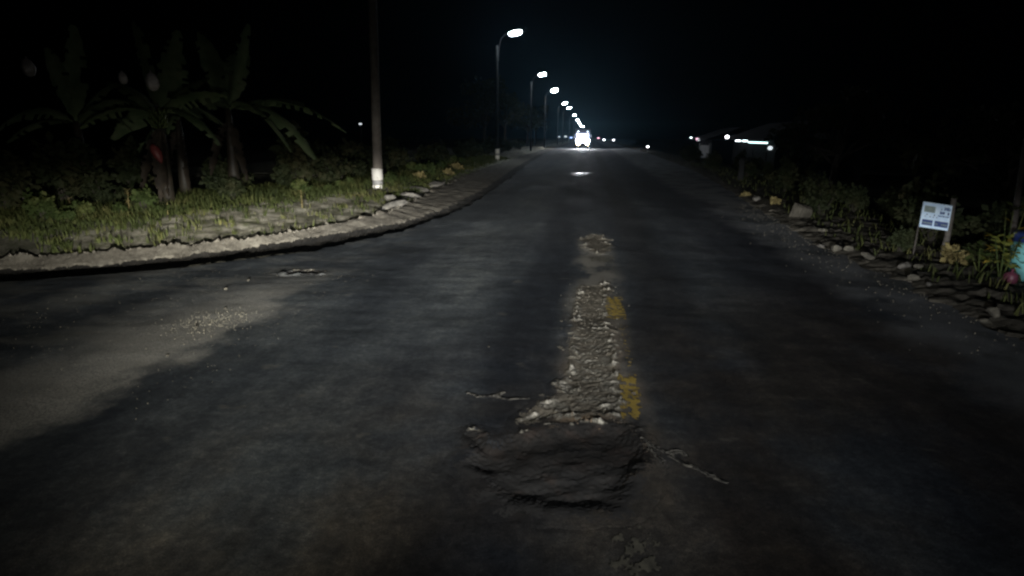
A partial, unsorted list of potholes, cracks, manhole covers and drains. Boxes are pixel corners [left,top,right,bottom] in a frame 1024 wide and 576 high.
crack [640,437,729,484]
pothole [574,233,618,255]
pothole [440,412,669,531]
crack [466,392,530,400]
pothole [272,267,335,277]
pothole [506,281,638,429]
